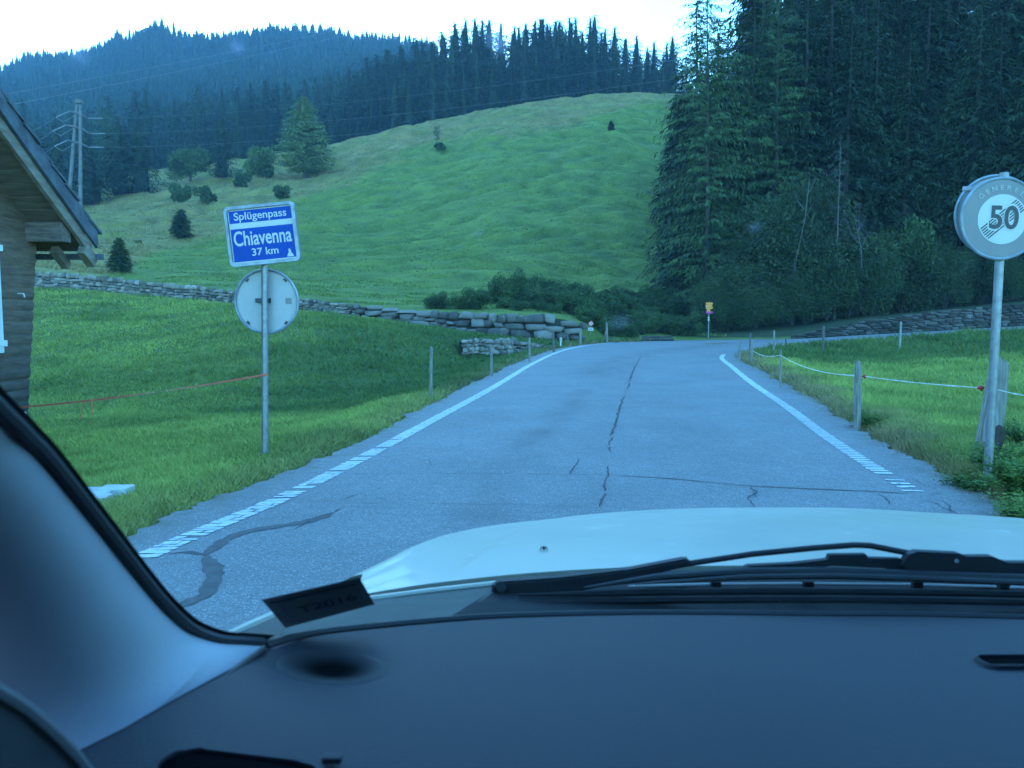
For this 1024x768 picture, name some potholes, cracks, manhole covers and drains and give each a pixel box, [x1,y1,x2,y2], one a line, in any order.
crack [308,357,959,514]
